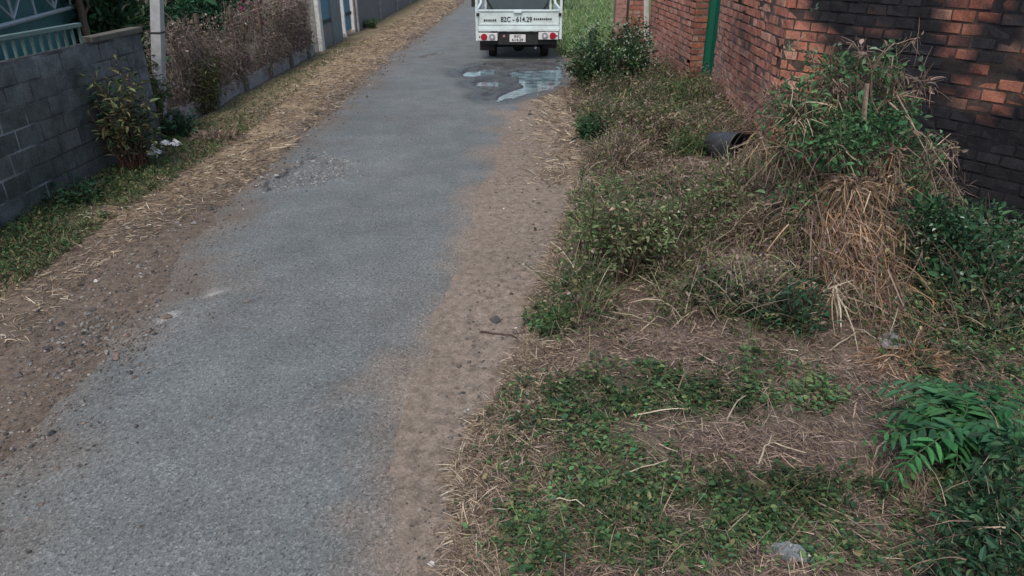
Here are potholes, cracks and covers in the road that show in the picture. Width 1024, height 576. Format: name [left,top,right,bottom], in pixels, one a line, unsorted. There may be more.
pothole [449,58,572,104]
pothole [248,148,364,199]
